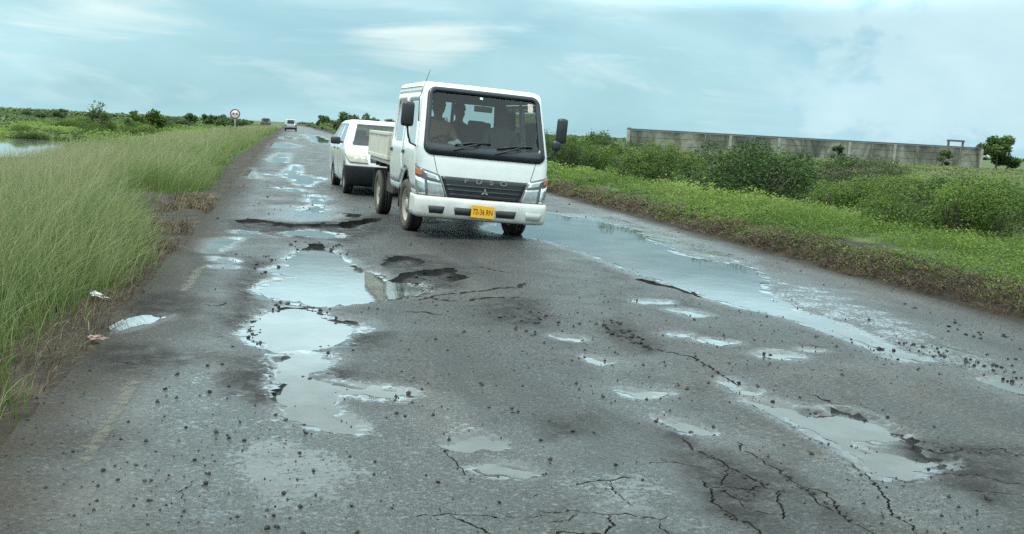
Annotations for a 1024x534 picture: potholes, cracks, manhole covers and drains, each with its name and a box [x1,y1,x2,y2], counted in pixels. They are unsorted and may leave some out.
pothole [253,243,470,309]
crack [407,256,528,315]
crack [413,477,670,534]
pothole [790,407,947,483]
pothole [244,307,364,356]
pothole [270,356,329,412]
crack [650,436,917,534]
pothole [234,218,386,243]
